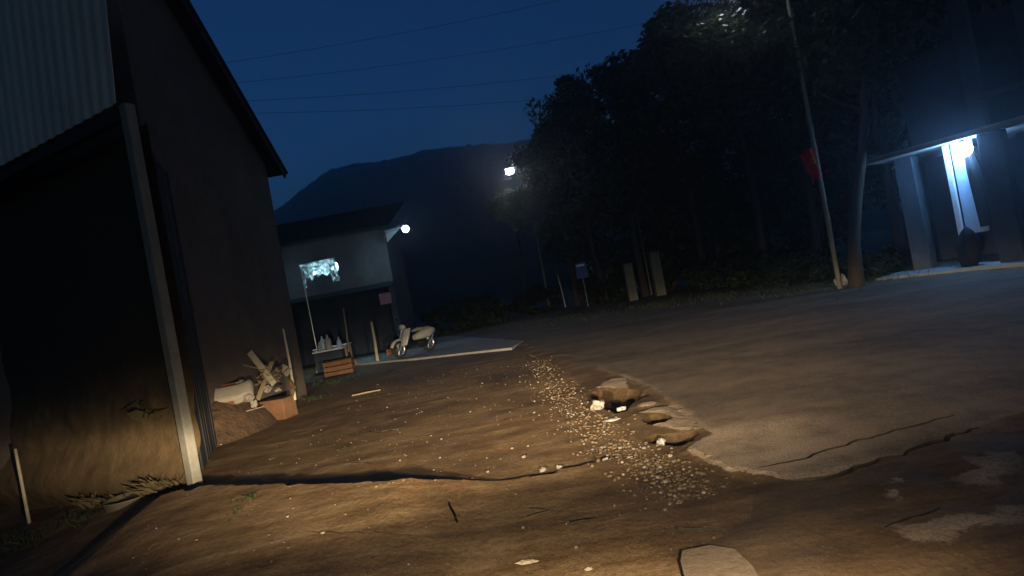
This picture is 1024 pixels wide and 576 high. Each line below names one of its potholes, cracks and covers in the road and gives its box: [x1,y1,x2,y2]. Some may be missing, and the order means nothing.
crack [305,500,458,539]
pothole [640,414,673,425]
crack [884,507,942,527]
pothole [590,387,650,414]
pothole [645,428,700,446]
crack [759,415,980,482]
